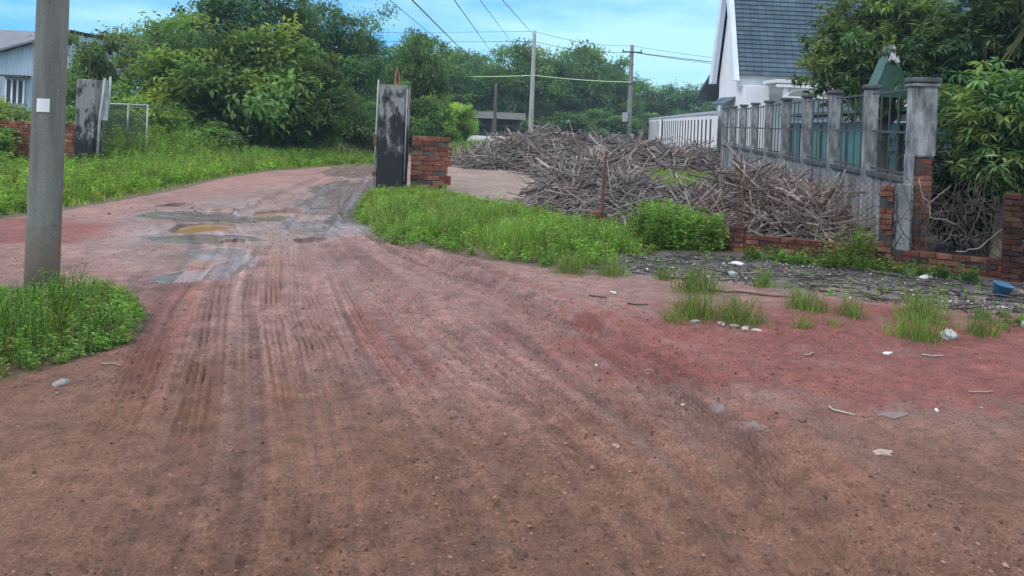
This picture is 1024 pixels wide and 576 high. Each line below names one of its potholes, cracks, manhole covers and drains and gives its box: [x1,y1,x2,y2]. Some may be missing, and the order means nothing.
pothole [249,207,311,218]
pothole [291,236,329,244]
pothole [161,222,242,235]
